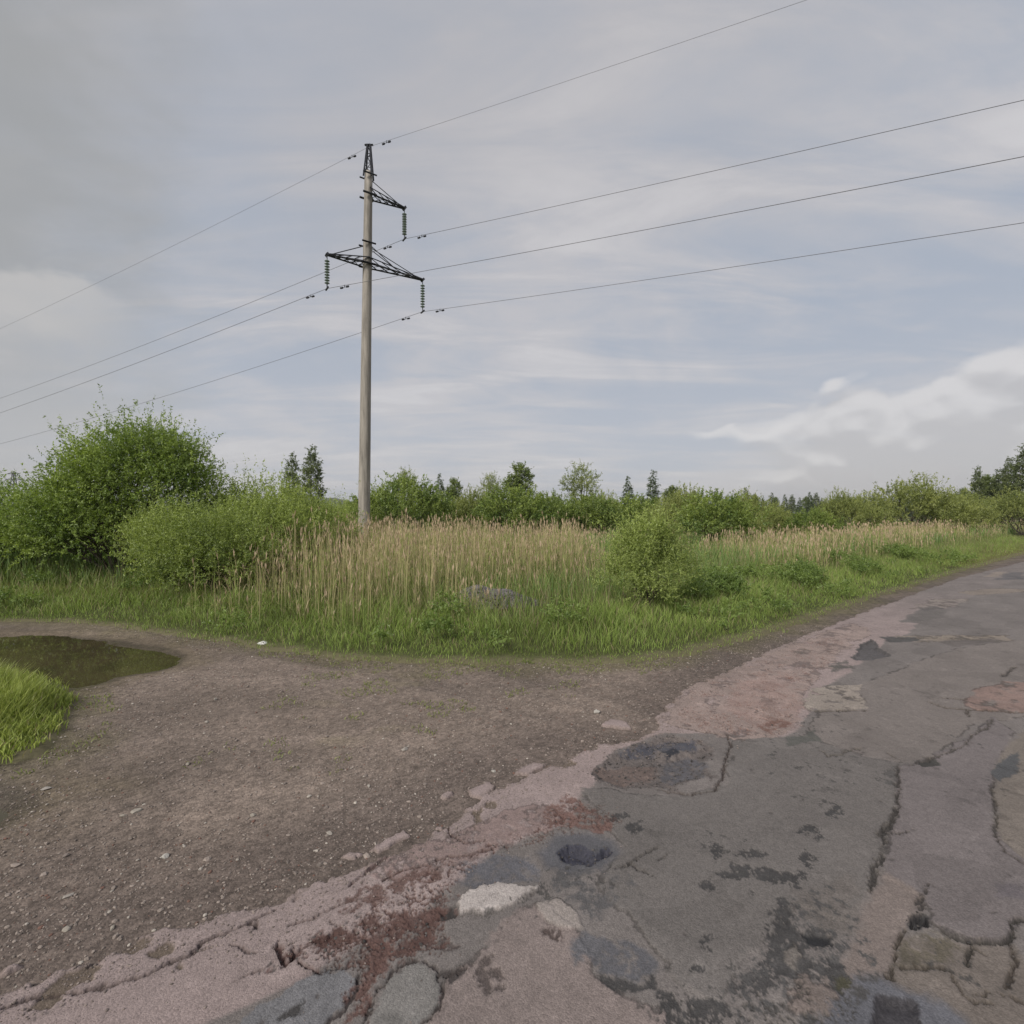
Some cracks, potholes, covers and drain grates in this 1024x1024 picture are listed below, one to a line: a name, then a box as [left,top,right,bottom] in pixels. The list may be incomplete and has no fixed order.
pothole [555,843,614,868]
pothole [850,638,892,661]
pothole [905,911,932,931]
crack [883,883,1024,1006]
crack [988,782,1024,865]
crack [657,633,849,796]
crack [819,748,913,892]
